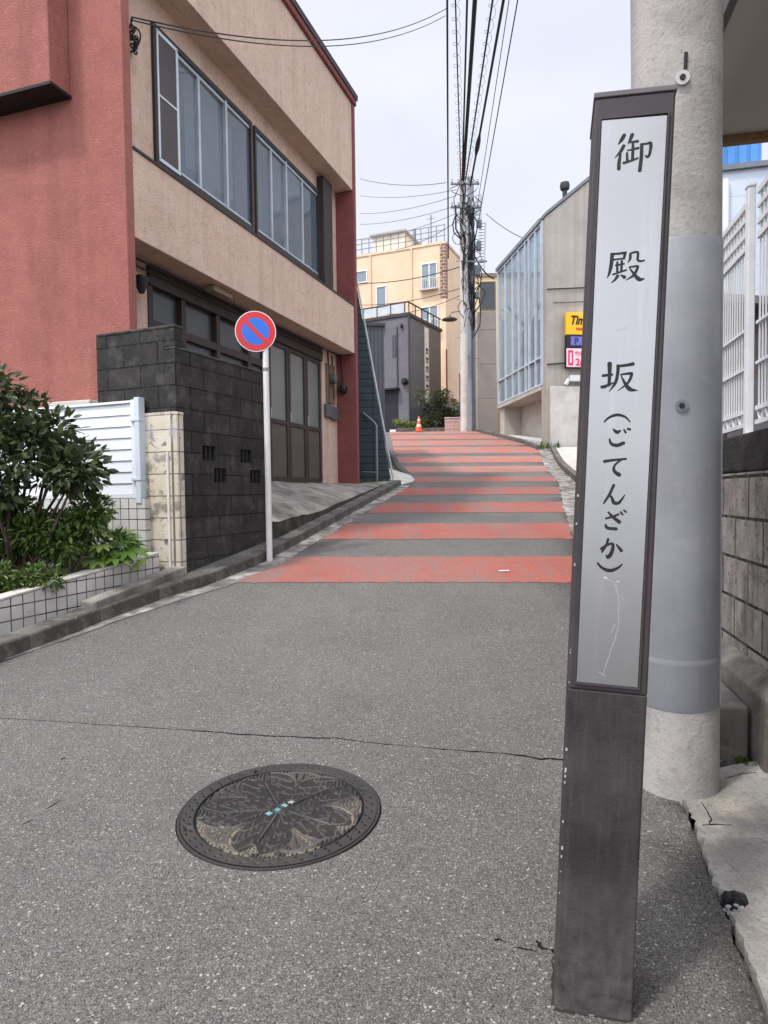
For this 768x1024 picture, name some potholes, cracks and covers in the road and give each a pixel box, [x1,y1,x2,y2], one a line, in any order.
manhole cover [175,763,382,871]
crack [495,938,554,953]
crack [701,802,726,826]
crack [3,718,563,761]
